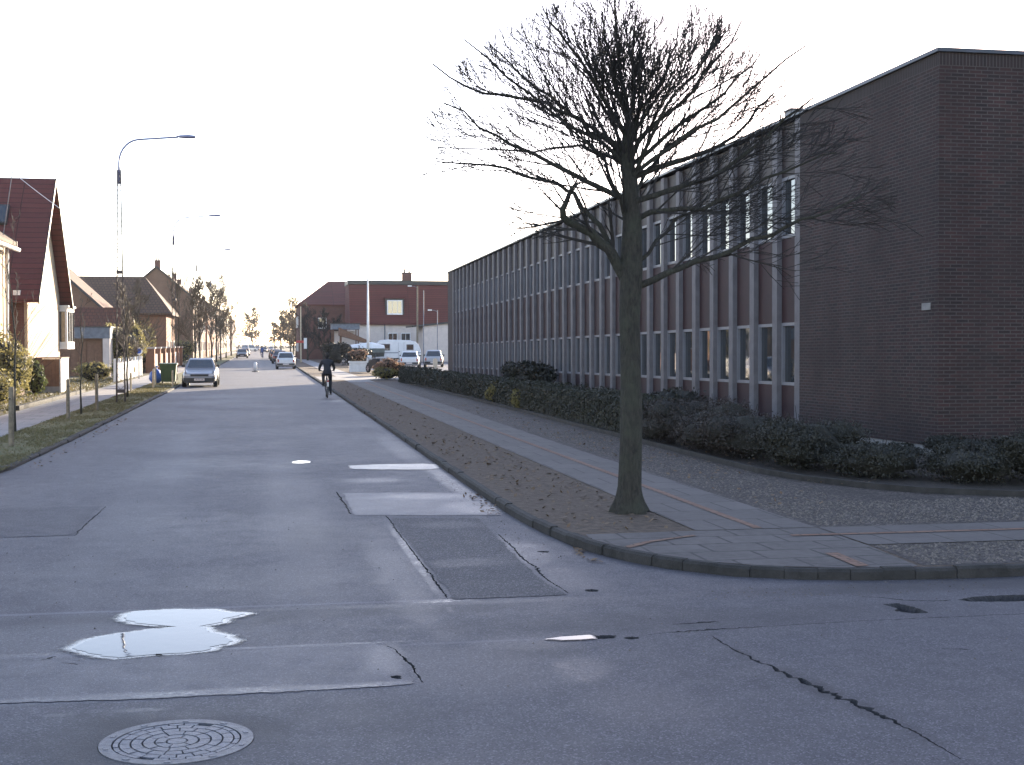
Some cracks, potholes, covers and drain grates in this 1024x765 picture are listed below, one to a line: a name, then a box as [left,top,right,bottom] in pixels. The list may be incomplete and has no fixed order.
crack [648,597,1010,759]
manhole cover [98,719,254,765]
pothole [883,603,928,613]
